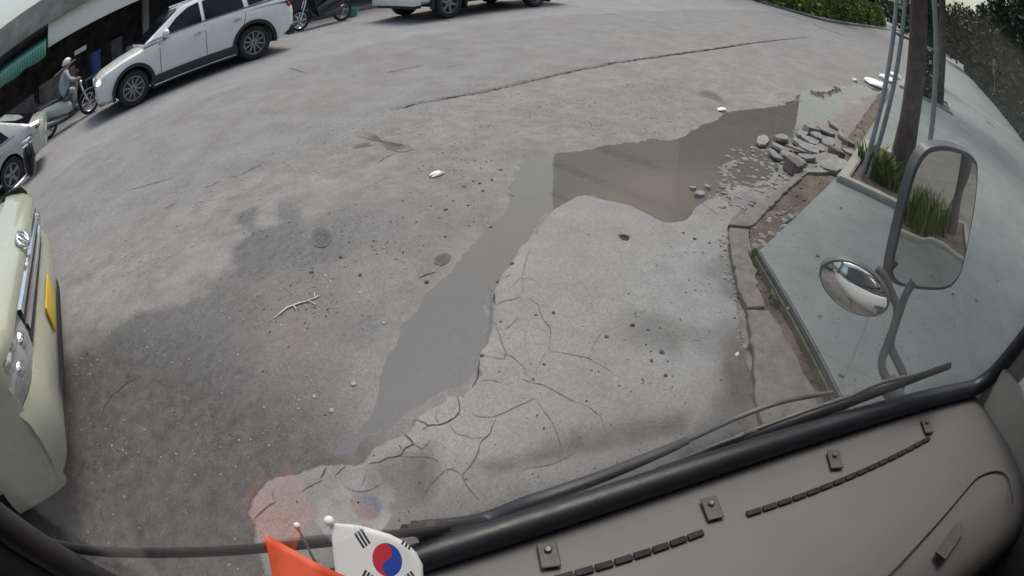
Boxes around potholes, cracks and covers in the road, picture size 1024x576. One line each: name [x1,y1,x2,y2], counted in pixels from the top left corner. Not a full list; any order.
pothole [360,132,412,152]
crack [301,251,612,500]
pothole [434,253,451,265]
